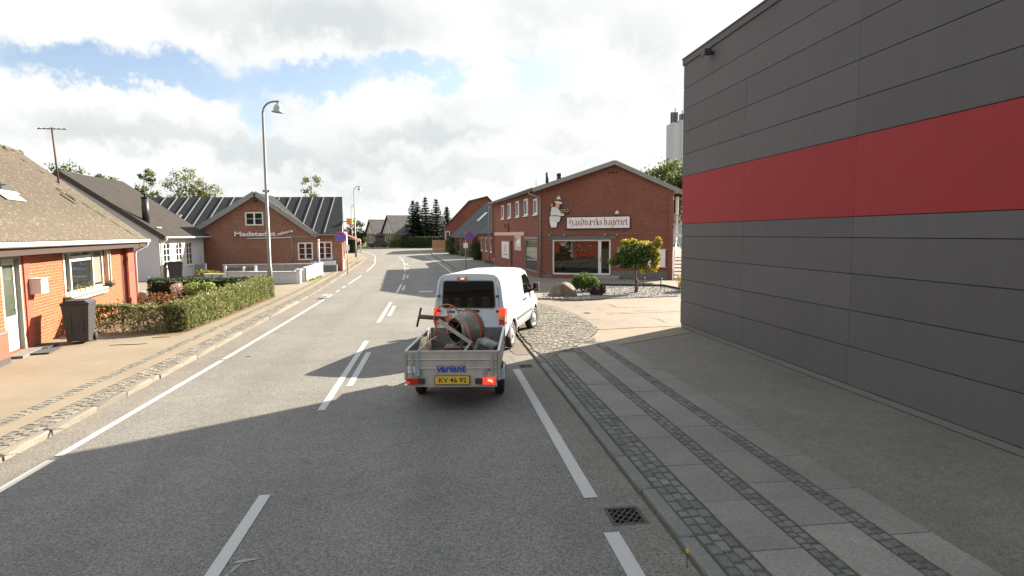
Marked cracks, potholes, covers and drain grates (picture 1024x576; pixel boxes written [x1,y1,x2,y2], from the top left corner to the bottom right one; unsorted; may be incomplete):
drain grate [603,506,649,526]
